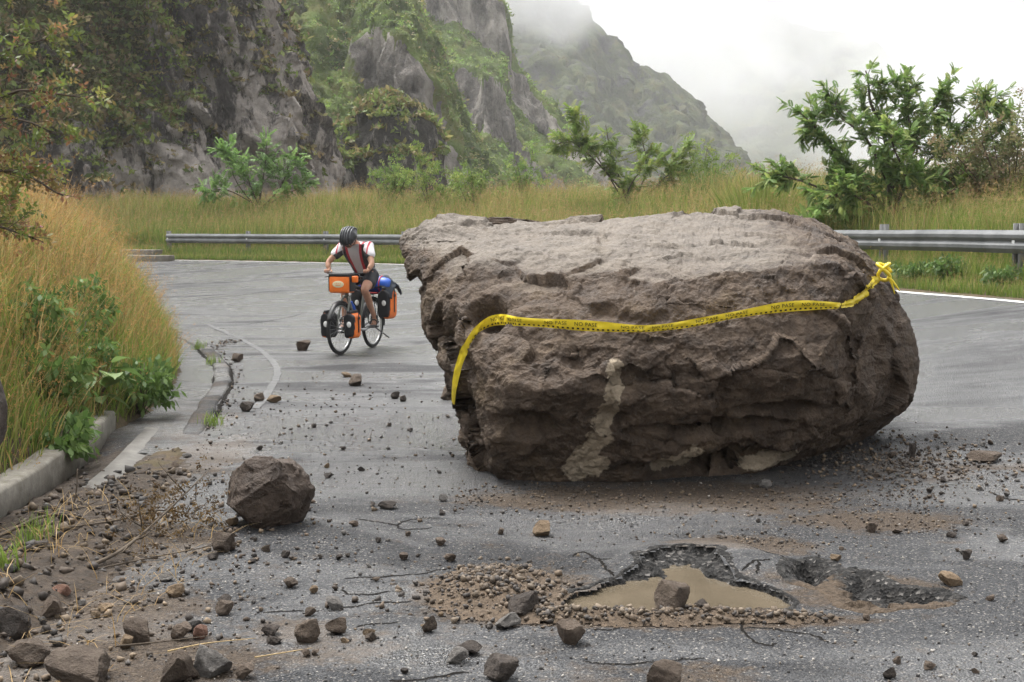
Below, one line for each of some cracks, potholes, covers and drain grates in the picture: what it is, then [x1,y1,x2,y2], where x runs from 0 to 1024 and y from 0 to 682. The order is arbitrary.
crack [341,569,441,628]
crack [739,623,828,647]
pothole [819,566,968,615]
crack [358,517,439,530]
crack [572,551,614,576]
pothole [775,556,850,591]
pothole [563,543,800,612]
